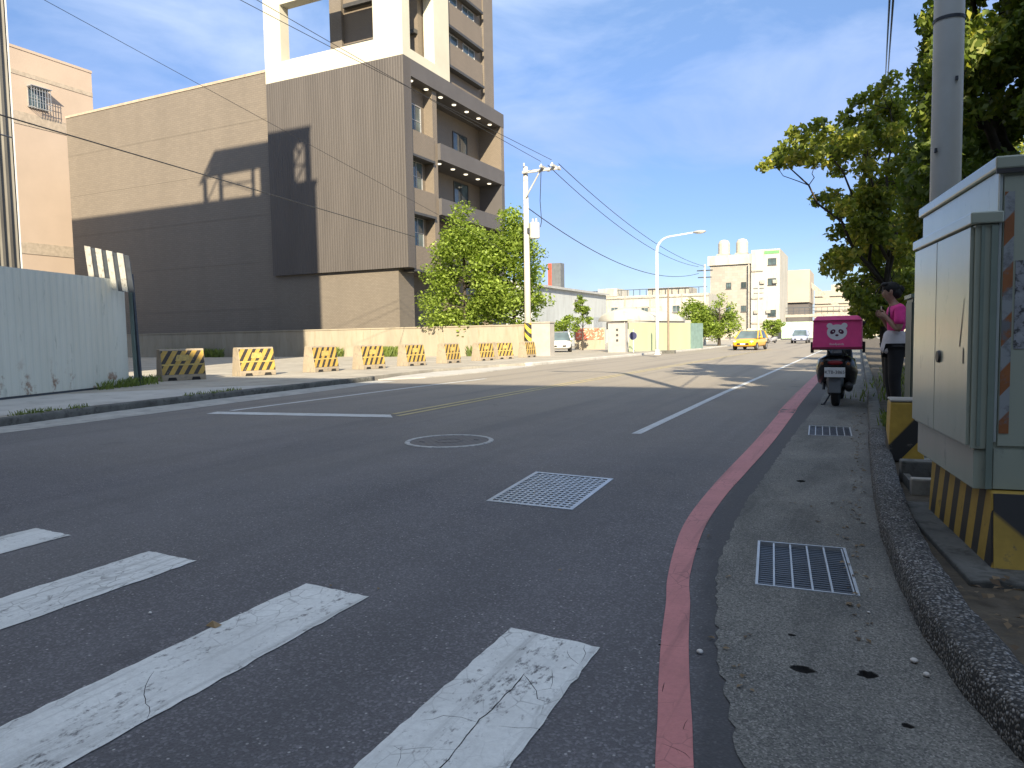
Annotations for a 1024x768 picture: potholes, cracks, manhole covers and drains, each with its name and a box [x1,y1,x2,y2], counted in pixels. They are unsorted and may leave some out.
pothole [857,670,879,679]
pothole [789,665,817,674]
drain grate [808,425,852,436]
drain grate [486,472,613,510]
drain grate [755,540,860,597]
manhole cover [405,434,494,448]
